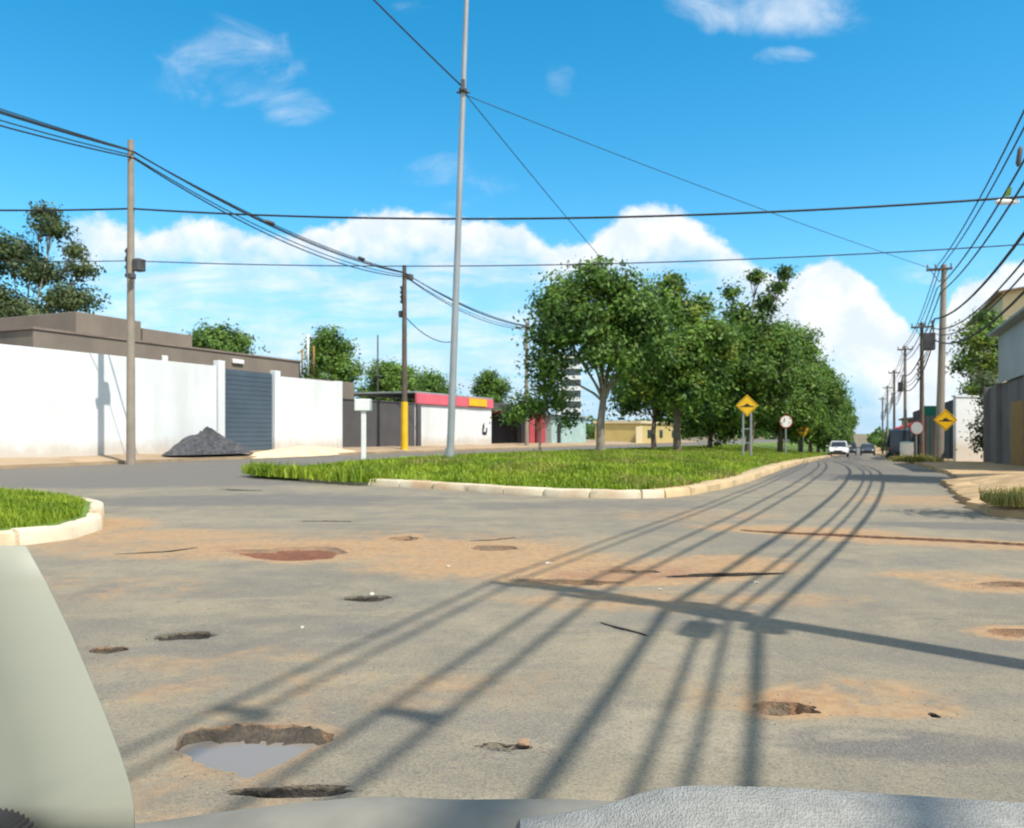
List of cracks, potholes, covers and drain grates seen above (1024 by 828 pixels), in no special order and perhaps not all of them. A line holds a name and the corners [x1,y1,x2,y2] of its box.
pothole [225,784,353,798]
pothole [475,742,532,752]
crack [600,622,648,636]
pothole [174,723,334,778]
pothole [752,701,821,716]
pothole [154,631,218,641]
pothole [987,629,1024,637]
pothole [226,546,348,561]
